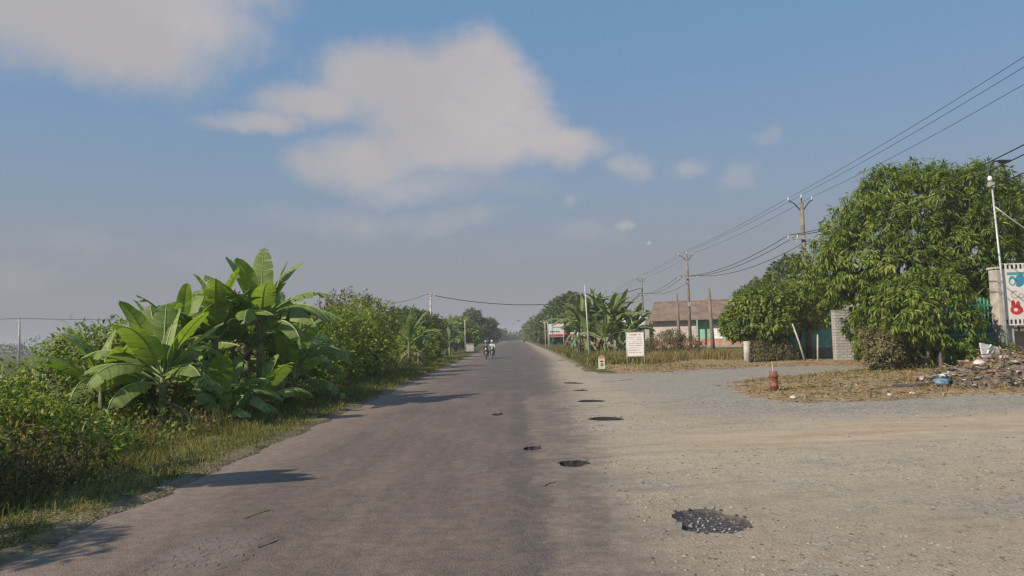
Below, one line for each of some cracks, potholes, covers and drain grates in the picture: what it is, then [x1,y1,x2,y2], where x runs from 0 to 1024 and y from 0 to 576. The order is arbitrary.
pothole [557,459,591,467]
pothole [670,506,753,534]
crack [142,536,283,574]
